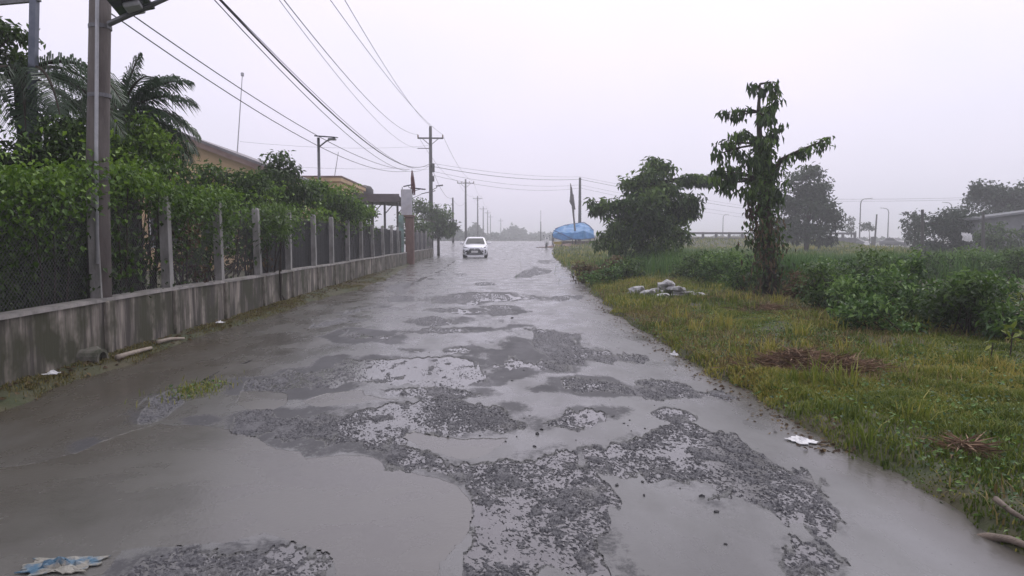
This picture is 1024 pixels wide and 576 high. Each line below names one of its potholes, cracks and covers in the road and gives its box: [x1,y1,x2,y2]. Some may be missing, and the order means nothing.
pothole [241,355,487,393]
pothole [383,445,622,576]
pothole [137,389,185,425]
pothole [650,406,698,424]
pothole [229,399,608,456]
pothole [634,378,739,401]
pothole [380,386,482,401]
pothole [422,293,583,305]
